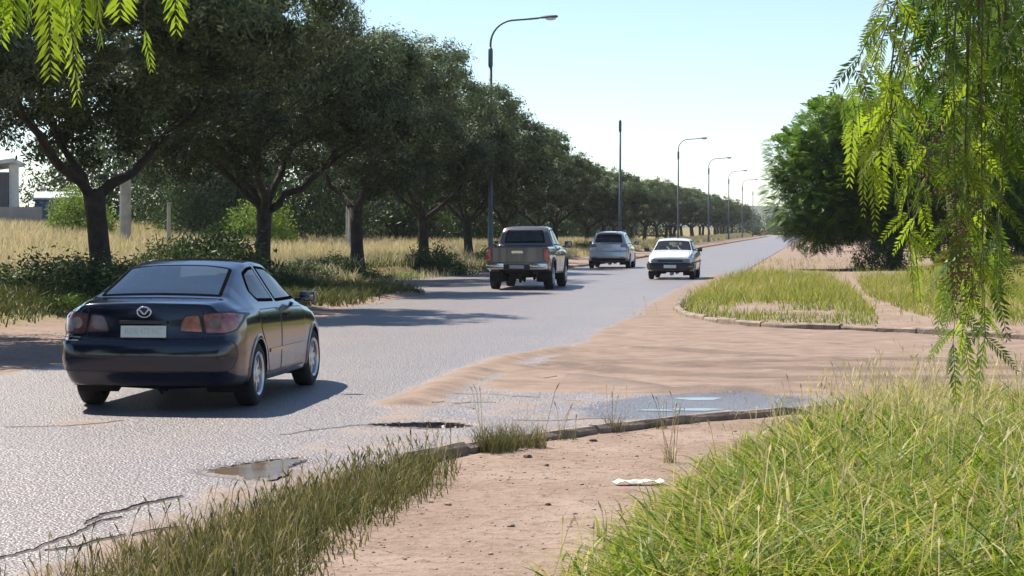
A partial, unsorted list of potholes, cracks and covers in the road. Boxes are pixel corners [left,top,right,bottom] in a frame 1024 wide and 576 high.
crack [0,495,185,559]
pothole [199,457,308,481]
pothole [360,421,474,430]
crack [5,420,124,428]
crack [280,423,360,435]
